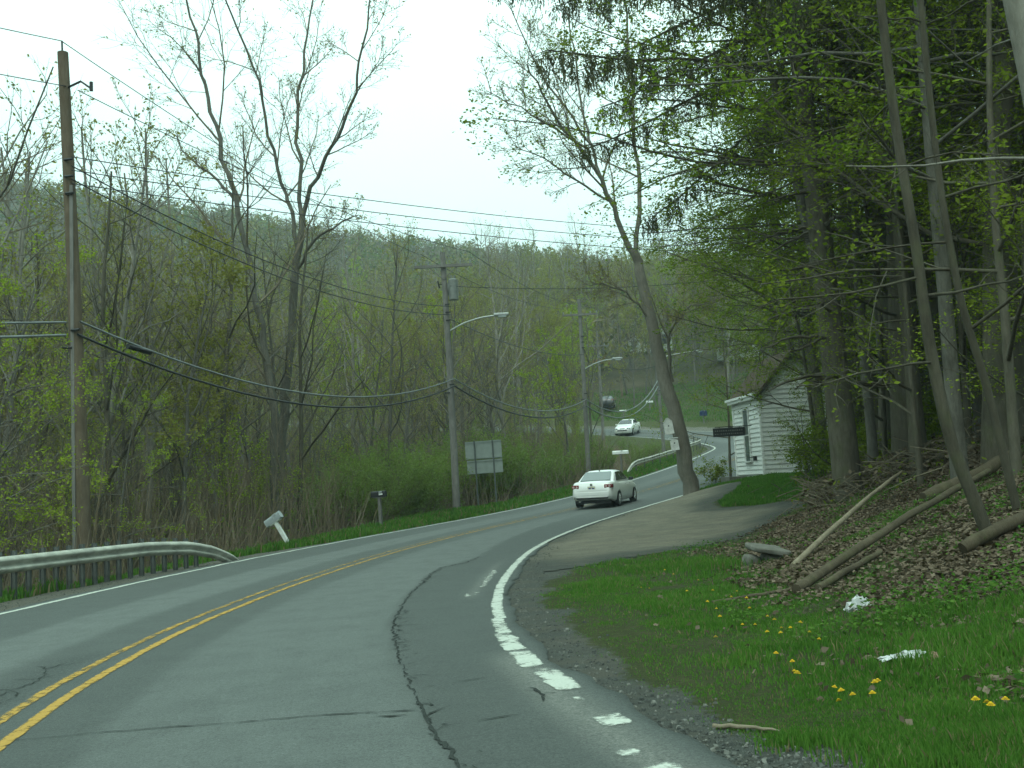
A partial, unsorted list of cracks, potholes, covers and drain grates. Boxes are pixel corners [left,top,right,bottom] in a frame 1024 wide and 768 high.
crack [0,662,80,703]
crack [481,687,554,720]
crack [17,557,485,768]
